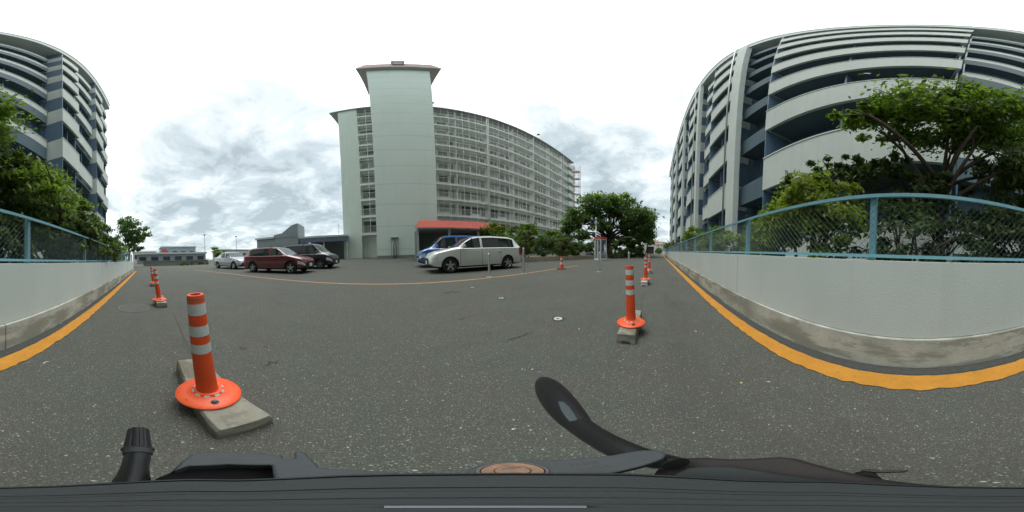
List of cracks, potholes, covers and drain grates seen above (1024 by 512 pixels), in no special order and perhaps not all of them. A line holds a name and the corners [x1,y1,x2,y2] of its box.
manhole cover [118,304,150,312]
